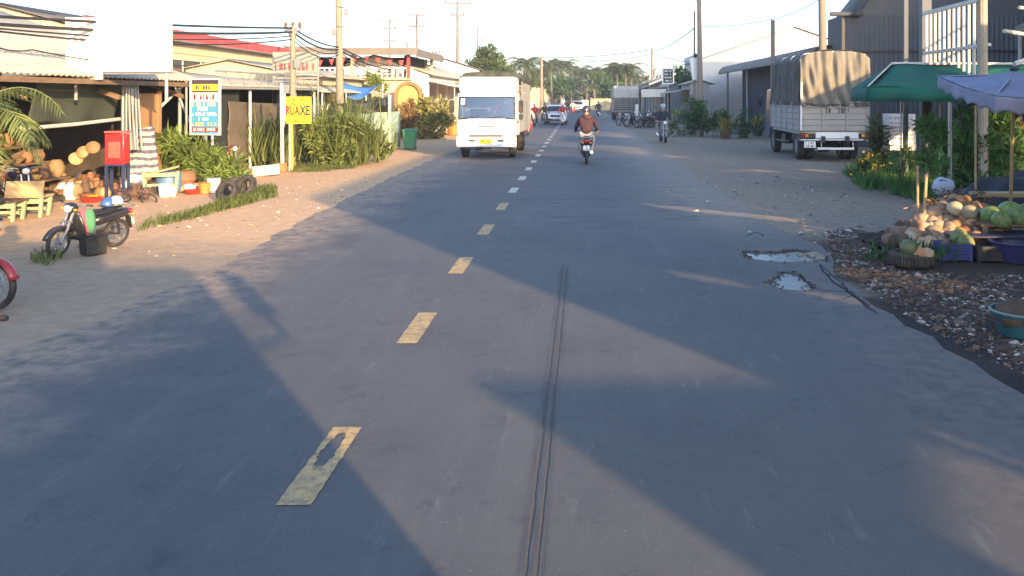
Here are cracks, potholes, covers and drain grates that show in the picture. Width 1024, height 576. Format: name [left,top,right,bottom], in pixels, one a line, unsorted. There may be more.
pothole [763,270,820,292]
crack [812,264,877,313]
pothole [737,248,834,263]
